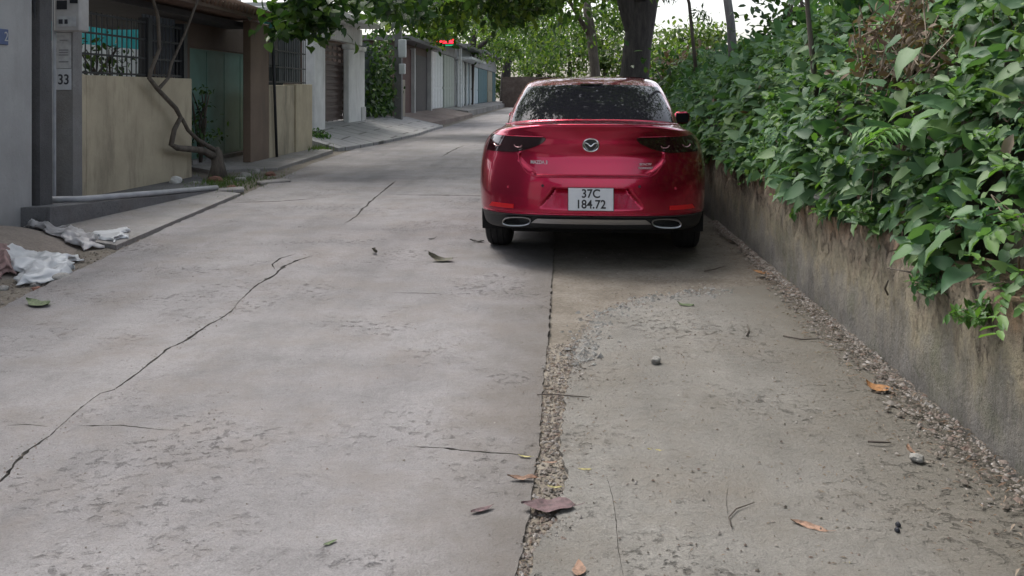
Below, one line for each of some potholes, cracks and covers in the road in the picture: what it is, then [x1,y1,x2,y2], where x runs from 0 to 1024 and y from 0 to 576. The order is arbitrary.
crack [408,446,529,456]
crack [606,476,623,573]
crack [344,182,394,224]
crack [0,254,307,482]
